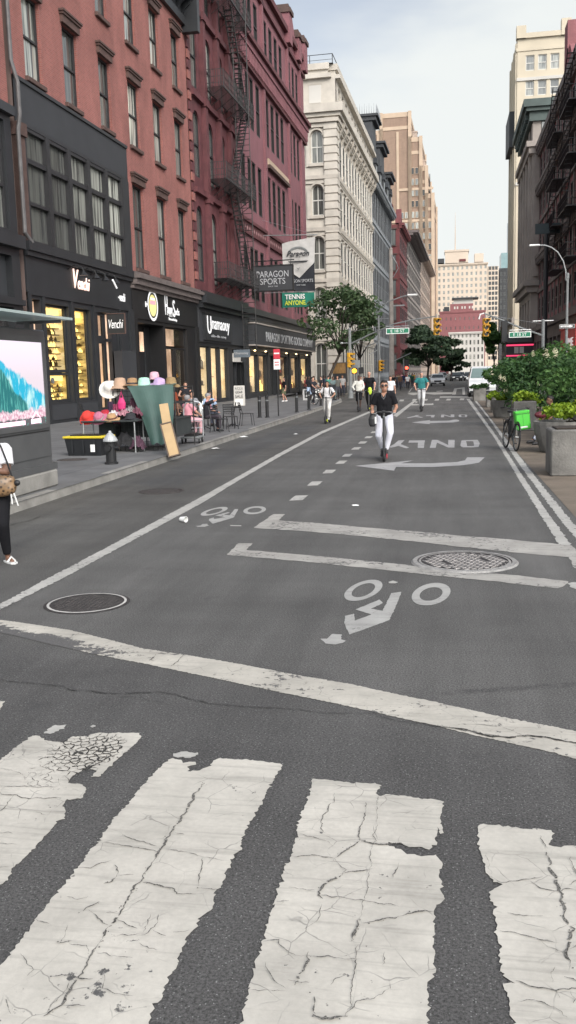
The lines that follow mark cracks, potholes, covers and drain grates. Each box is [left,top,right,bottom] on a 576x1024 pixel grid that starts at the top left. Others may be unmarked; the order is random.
manhole cover [411,551,519,573]
crack [0,733,127,844]
manhole cover [43,593,130,614]
